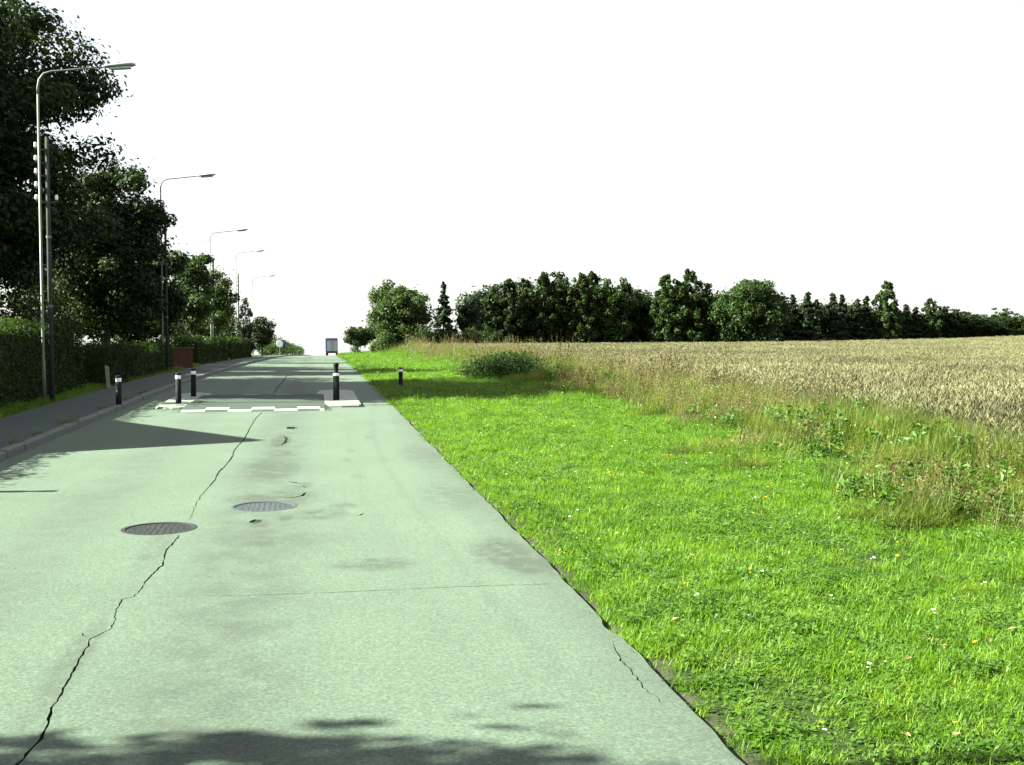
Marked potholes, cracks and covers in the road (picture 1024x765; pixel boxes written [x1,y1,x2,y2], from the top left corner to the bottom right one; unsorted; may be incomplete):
crack [613,642,662,704]
manhole cover [230,501,297,512]
manhole cover [120,522,198,535]
crack [15,412,262,765]
